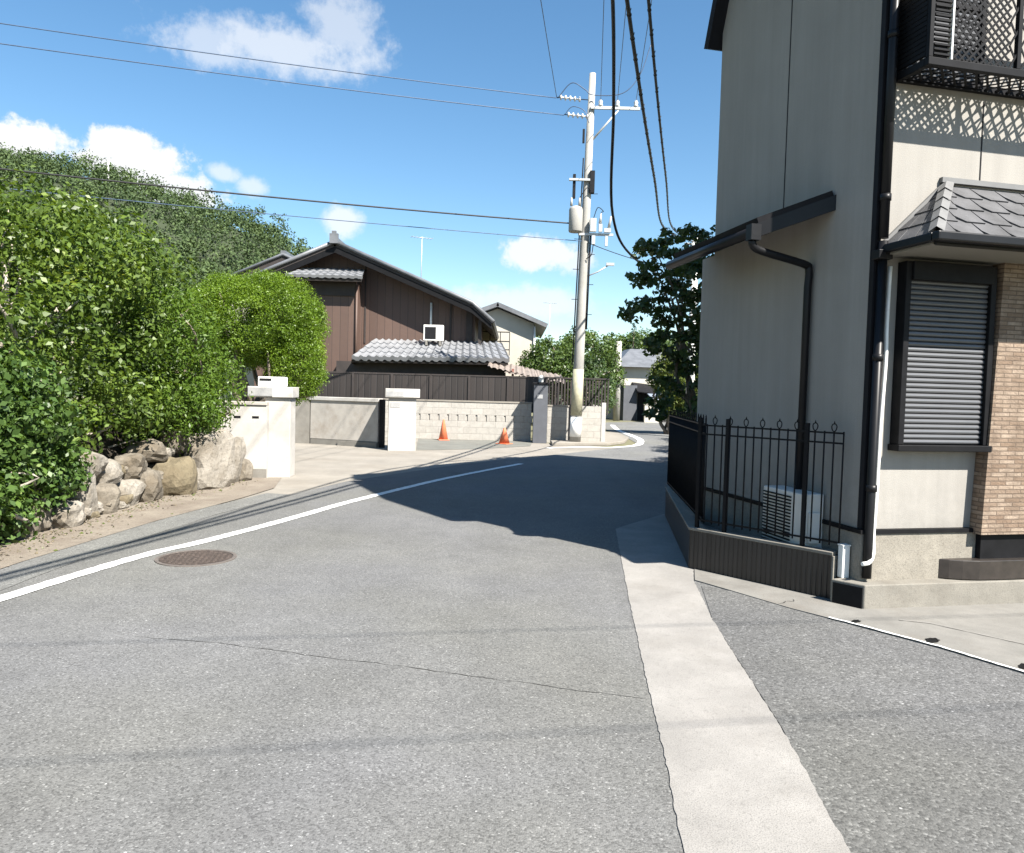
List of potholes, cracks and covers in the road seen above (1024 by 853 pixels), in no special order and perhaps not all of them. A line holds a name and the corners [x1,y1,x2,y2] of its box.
manhole cover [154,549,237,567]
crack [138,636,648,699]
